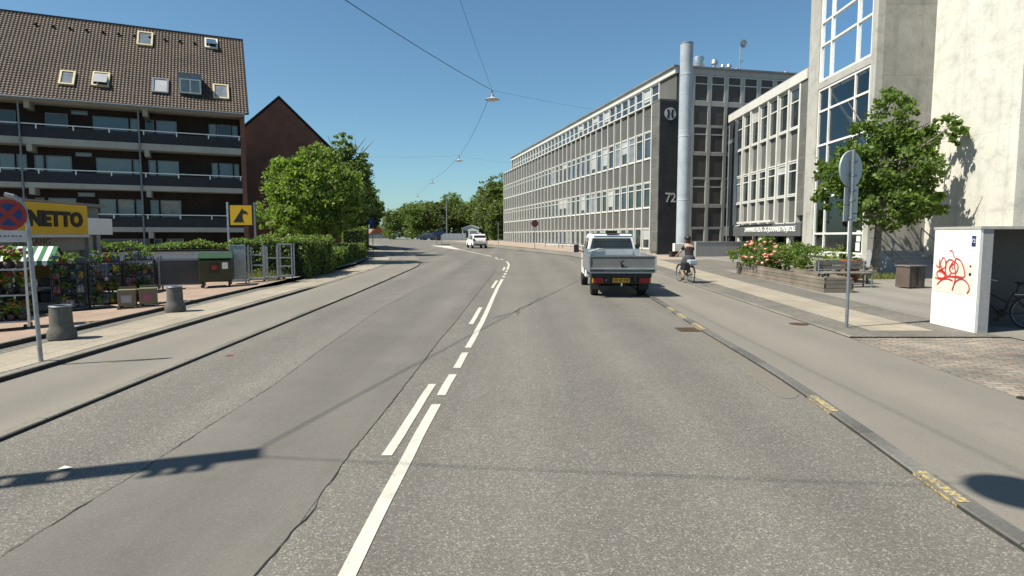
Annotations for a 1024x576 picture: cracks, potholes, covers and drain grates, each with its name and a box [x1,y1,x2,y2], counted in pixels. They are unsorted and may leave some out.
crack [253,269,496,576]
crack [2,291,414,556]
